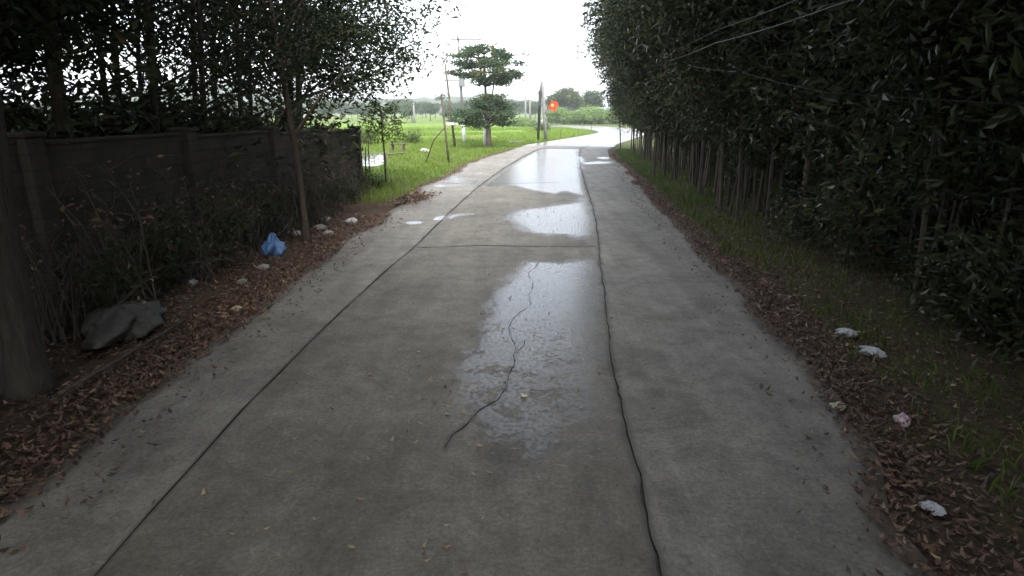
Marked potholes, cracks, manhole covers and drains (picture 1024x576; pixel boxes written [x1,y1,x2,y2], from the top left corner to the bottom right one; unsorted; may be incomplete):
crack [445,263,539,447]
